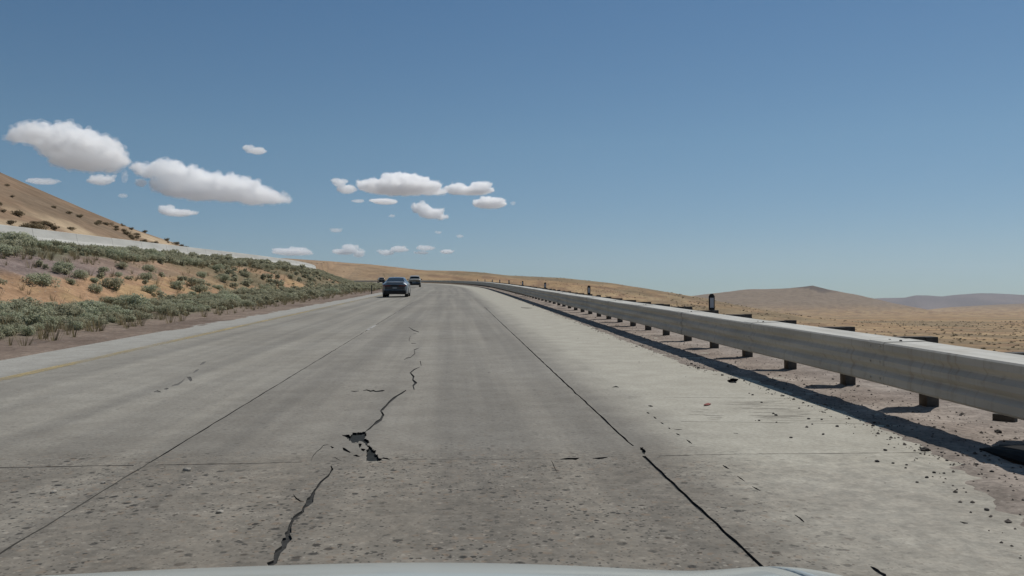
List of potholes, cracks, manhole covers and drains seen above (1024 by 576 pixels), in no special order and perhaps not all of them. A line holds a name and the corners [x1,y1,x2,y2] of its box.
crack [552,457,607,470]
pothole [342,432,382,461]
crack [352,327,421,431]
crack [267,444,360,566]
